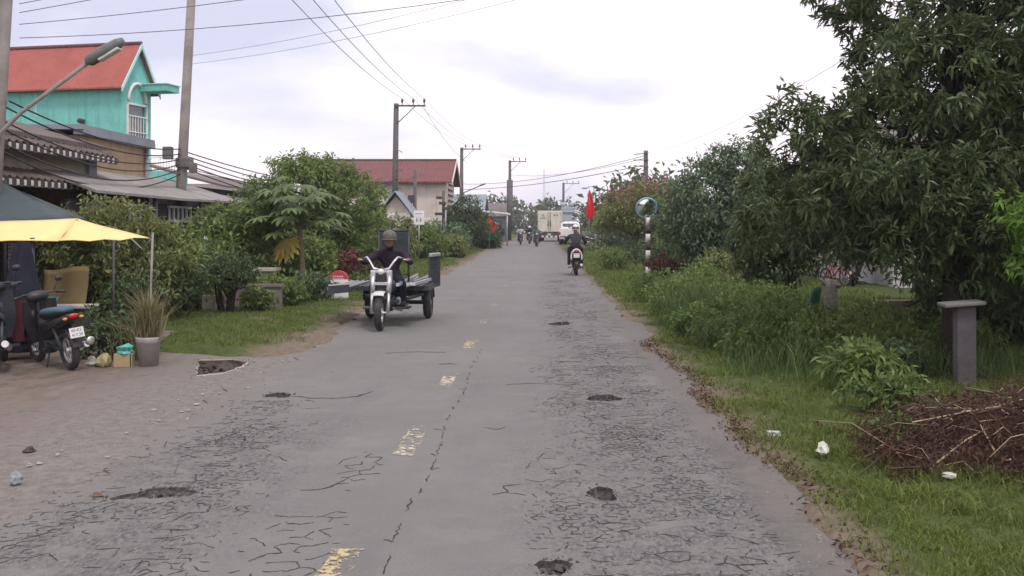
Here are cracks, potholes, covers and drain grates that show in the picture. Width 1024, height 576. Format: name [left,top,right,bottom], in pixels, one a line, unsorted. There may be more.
crack [312,453,381,491]
pothole [193,358,255,376]
crack [525,278,800,576]
pothole [585,483,618,503]
crack [229,511,349,576]
pothole [586,393,626,401]
pothole [528,556,579,576]
pothole [103,485,204,501]
crack [0,399,319,576]
